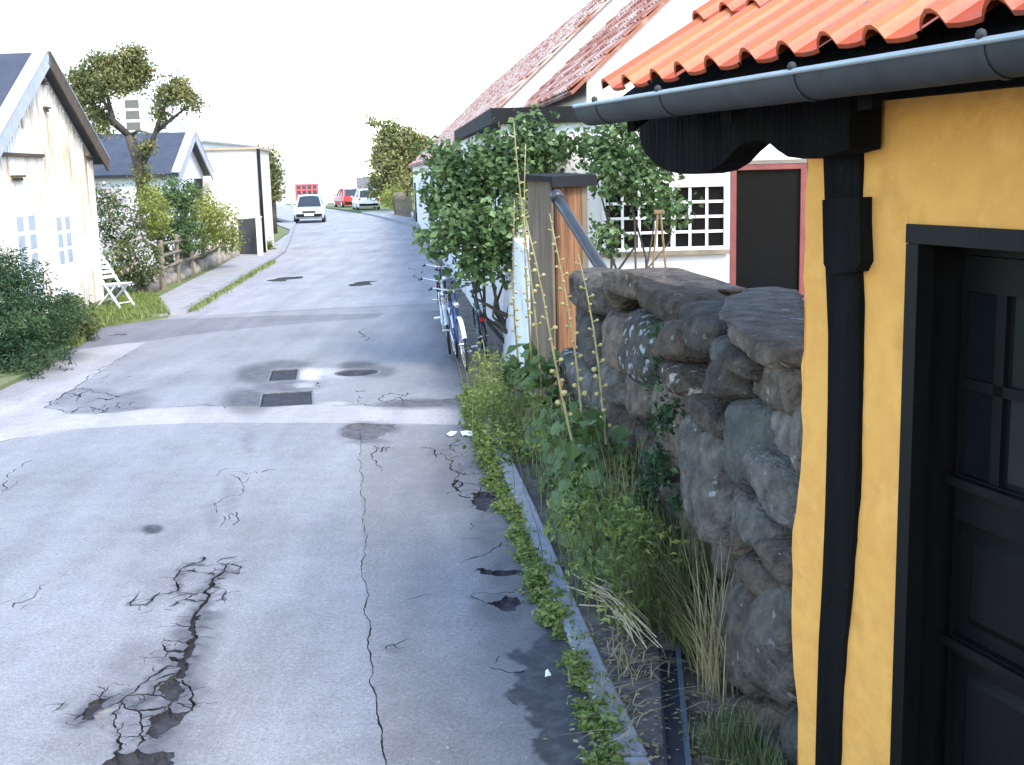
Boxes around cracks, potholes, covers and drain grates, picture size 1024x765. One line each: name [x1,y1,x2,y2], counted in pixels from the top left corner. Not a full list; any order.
crack [214,468,276,527]
pothole [488,595,522,612]
pothole [470,492,502,511]
crack [42,350,259,414]
crack [425,440,482,507]
pothole [476,568,528,576]
manhole cover [334,369,381,377]
